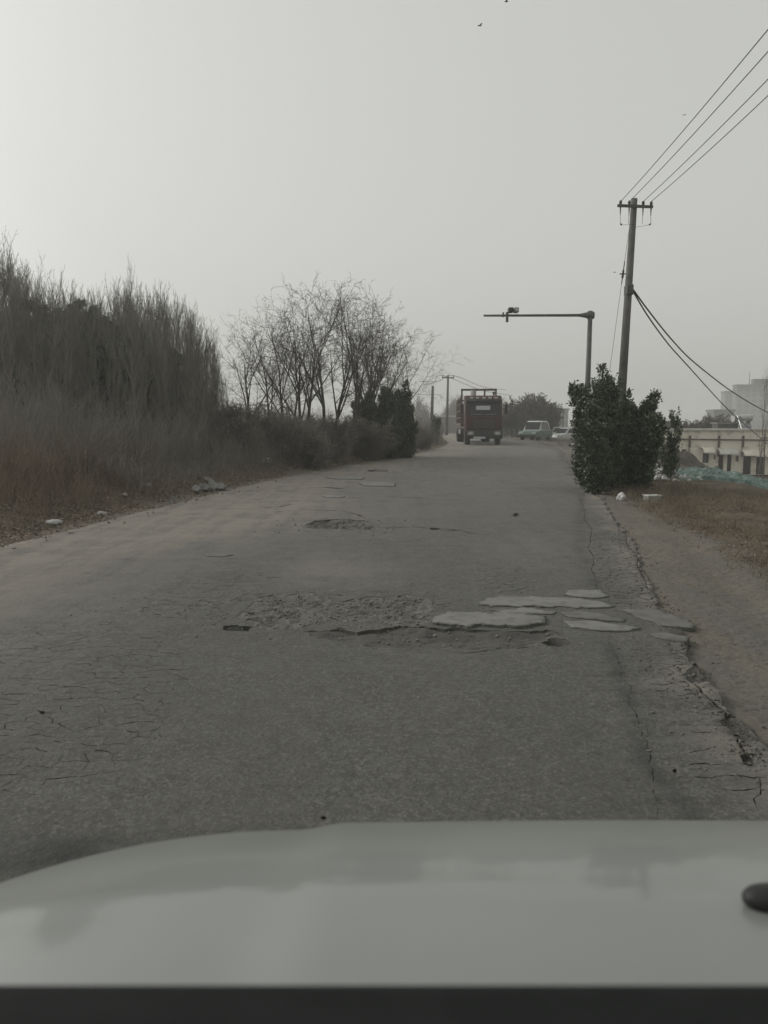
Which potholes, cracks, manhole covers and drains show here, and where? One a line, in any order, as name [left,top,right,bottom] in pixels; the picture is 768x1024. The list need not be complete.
pothole [236,591,342,630]
pothole [312,593,435,626]
crack [580,494,658,609]
pothole [543,638,570,647]
pothole [306,626,562,651]
pothole [303,519,375,530]
crack [617,645,762,818]
crack [0,621,189,801]
